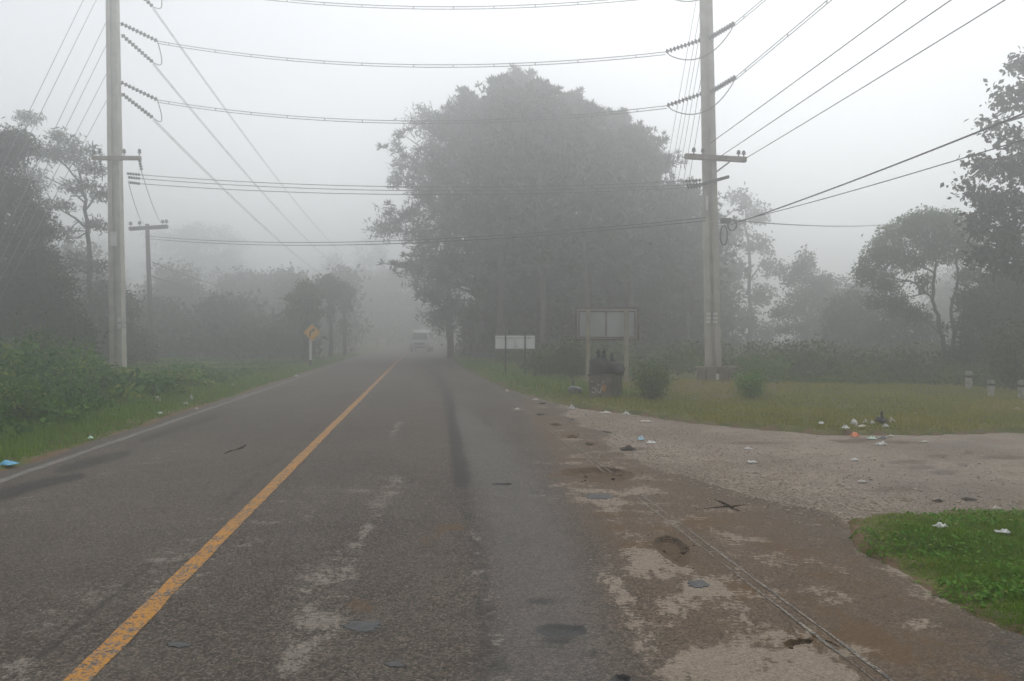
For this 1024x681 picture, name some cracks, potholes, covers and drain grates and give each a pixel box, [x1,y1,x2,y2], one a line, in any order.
pothole [558,463,649,485]
pothole [648,530,697,569]
pothole [783,634,816,649]
crack [696,499,743,511]
